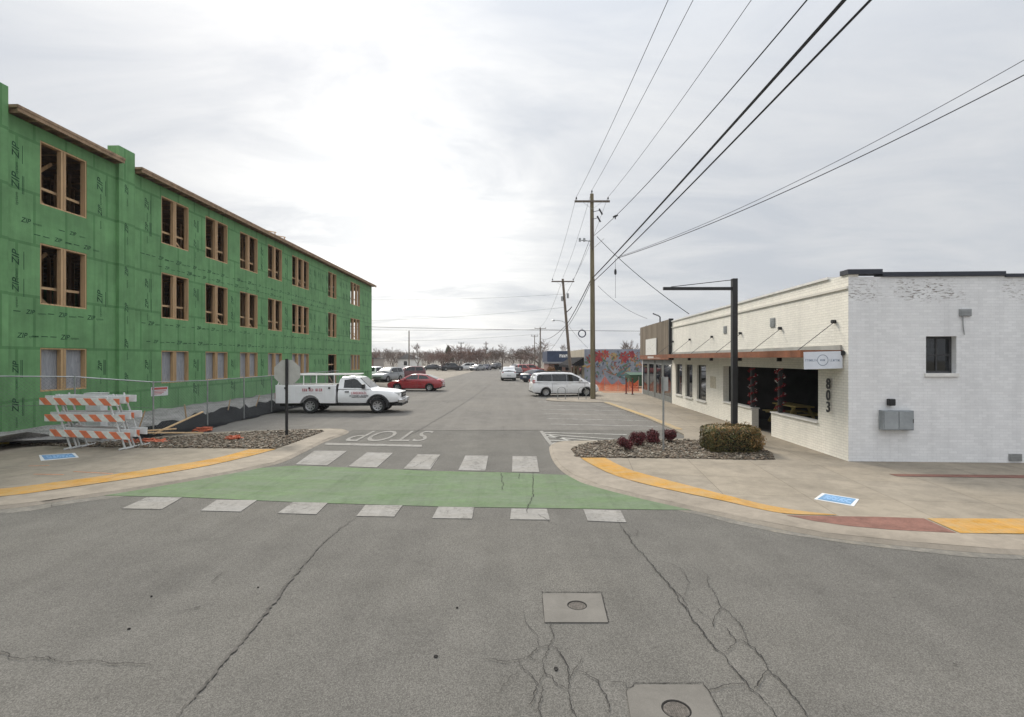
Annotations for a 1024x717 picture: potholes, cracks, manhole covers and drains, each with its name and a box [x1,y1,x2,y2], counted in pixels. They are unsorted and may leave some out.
manhole cover [661,700,691,717]
crack [619,522,808,717]
crack [2,651,151,665]
crack [480,617,635,717]
manhole cover [567,601,587,610]
